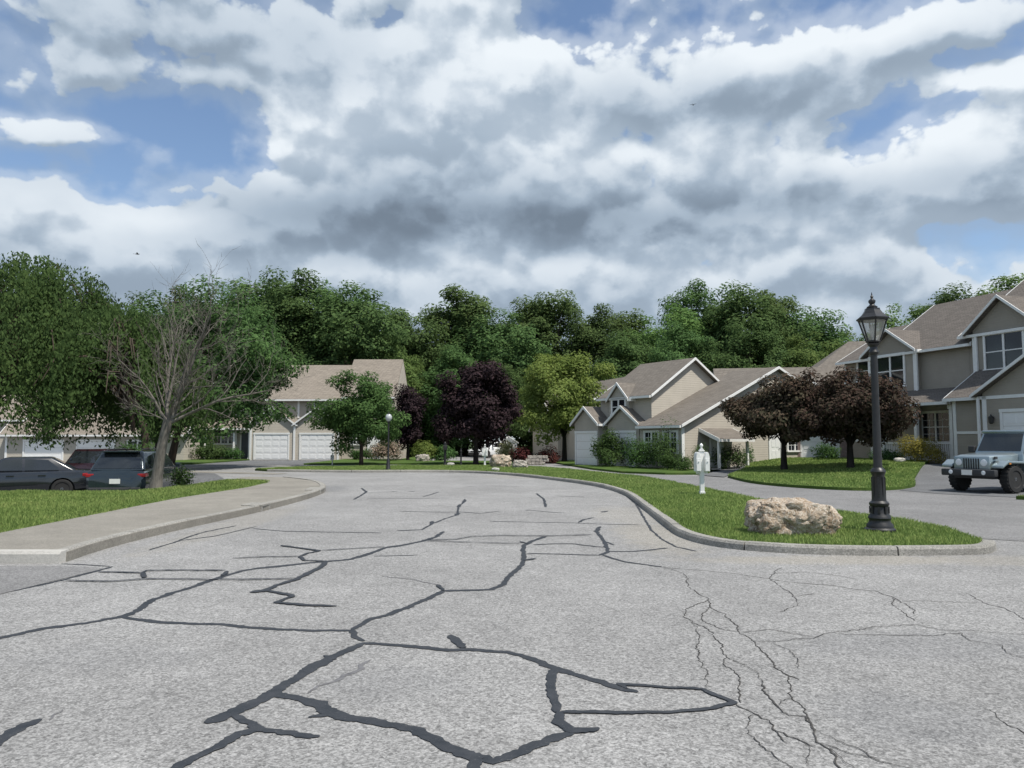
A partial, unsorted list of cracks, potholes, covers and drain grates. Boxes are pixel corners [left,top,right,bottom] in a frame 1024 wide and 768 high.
crack [664,567,966,619]
